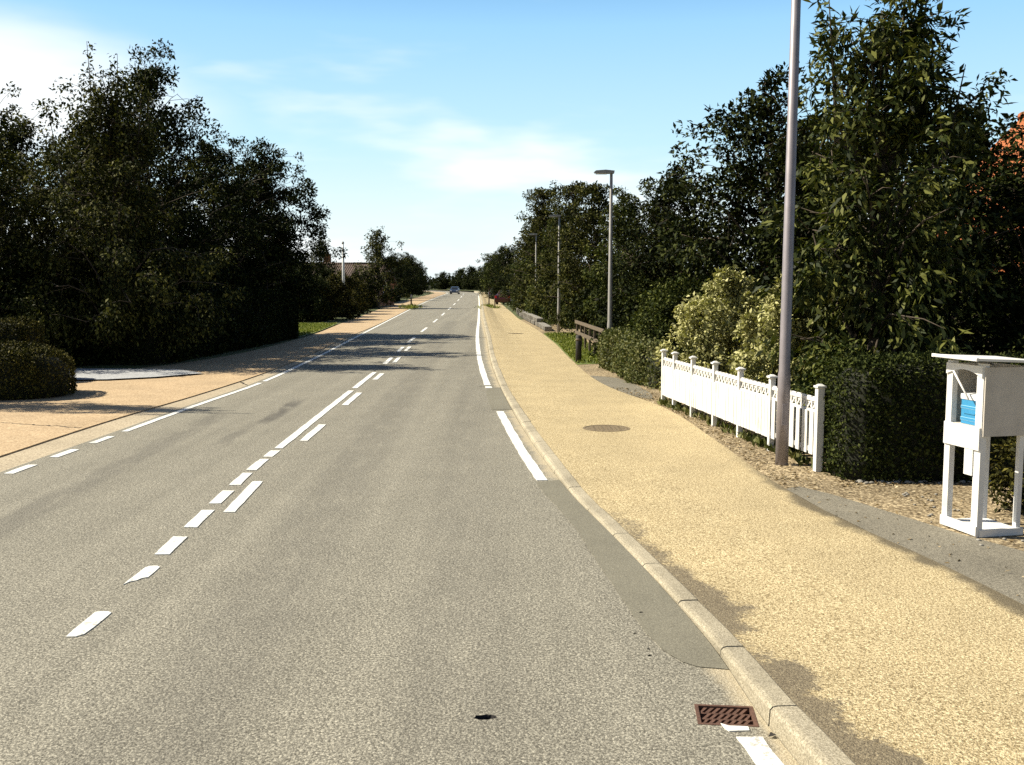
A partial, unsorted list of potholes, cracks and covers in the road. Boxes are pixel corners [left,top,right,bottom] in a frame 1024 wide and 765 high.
drain grate [694,704,759,727]
